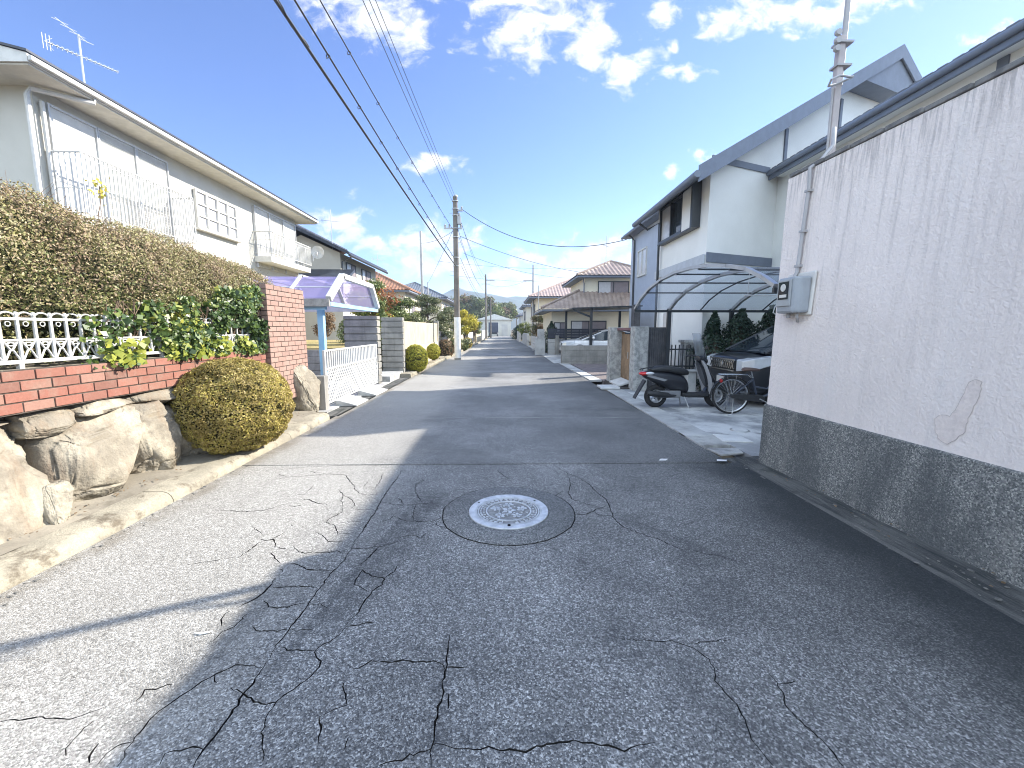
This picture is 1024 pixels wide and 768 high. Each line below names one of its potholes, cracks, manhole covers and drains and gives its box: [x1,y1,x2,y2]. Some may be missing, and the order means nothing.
crack [558,468,743,563]
crack [0,463,655,768]
manhole cover [469,494,548,530]
crack [610,635,843,766]
